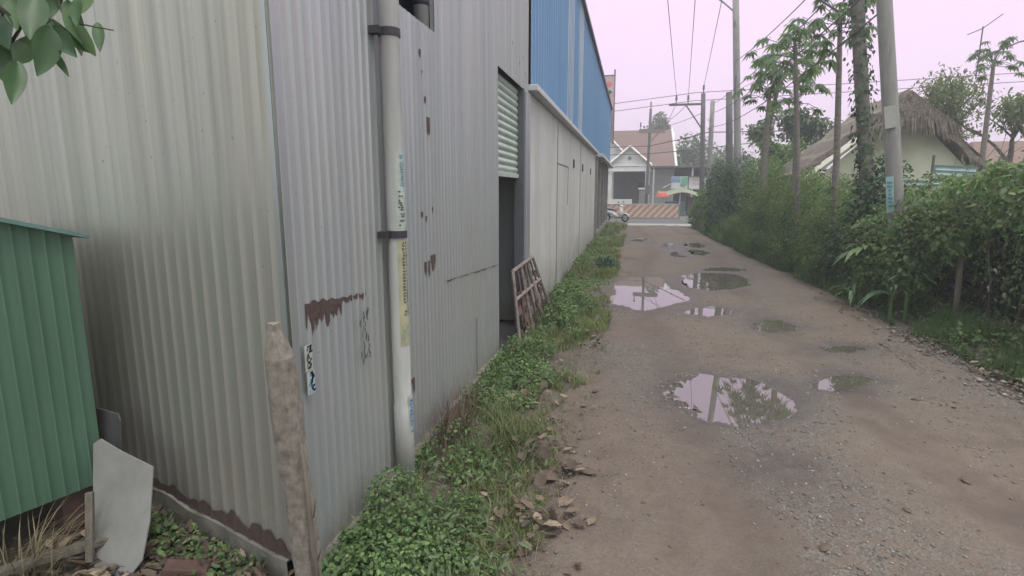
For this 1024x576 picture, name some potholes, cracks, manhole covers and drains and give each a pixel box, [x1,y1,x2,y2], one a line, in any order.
pothole [792,369,897,398]
pothole [593,275,700,314]
pothole [645,368,824,433]
pothole [662,248,696,258]
pothole [673,270,759,292]
pothole [683,248,716,256]
pothole [665,303,746,318]
pothole [736,315,815,336]
